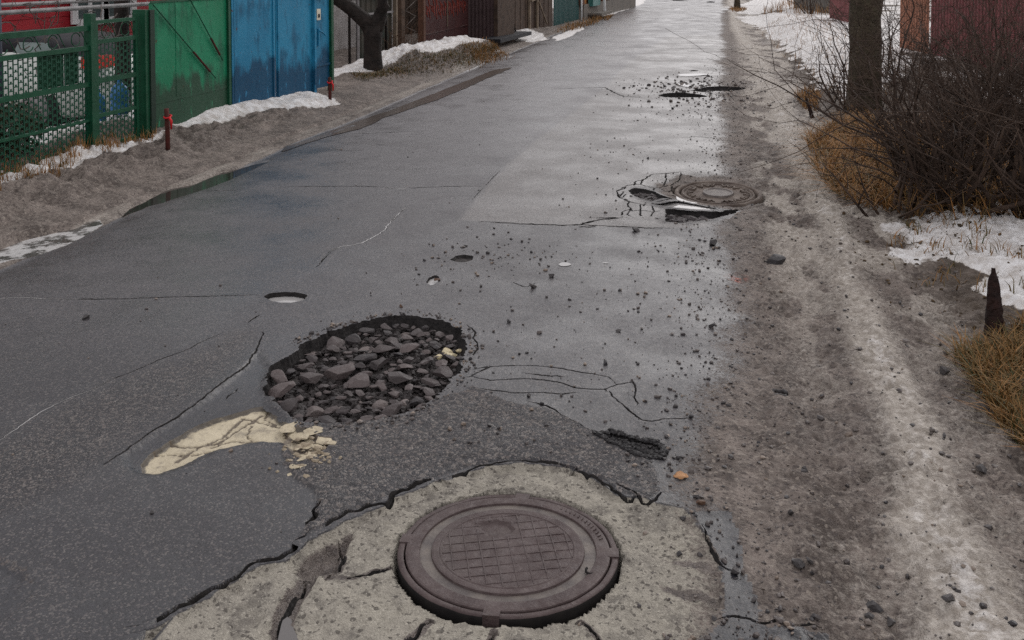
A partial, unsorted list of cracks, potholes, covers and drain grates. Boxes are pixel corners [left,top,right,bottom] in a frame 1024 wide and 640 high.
pothole [255,313,474,427]
pothole [421,274,445,287]
pothole [590,430,672,461]
pothole [686,85,751,93]
manhole cover [396,493,620,630]
crack [310,206,412,268]
pothole [259,290,313,305]
crack [0,293,270,465]
pothole [445,253,479,264]
manhole cover [674,181,763,207]
crack [449,324,696,436]
